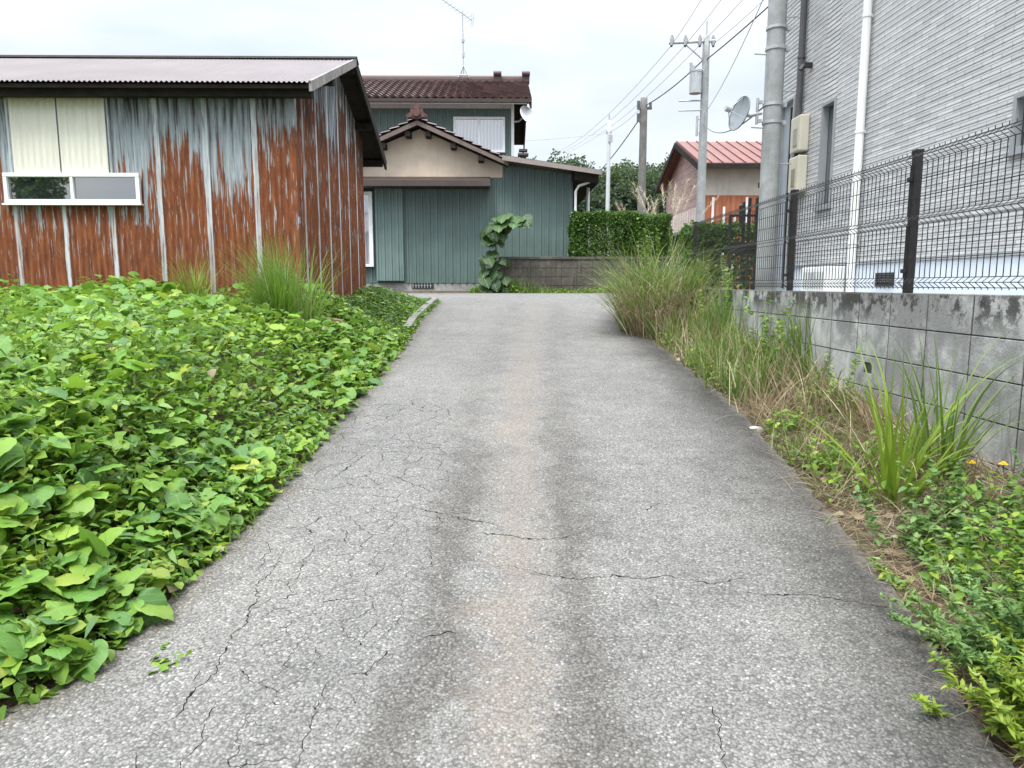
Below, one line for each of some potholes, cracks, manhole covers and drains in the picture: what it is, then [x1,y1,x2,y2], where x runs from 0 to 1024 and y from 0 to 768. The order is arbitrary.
crack [475,566,878,607]
crack [93,399,577,768]
crack [700,693,727,768]
